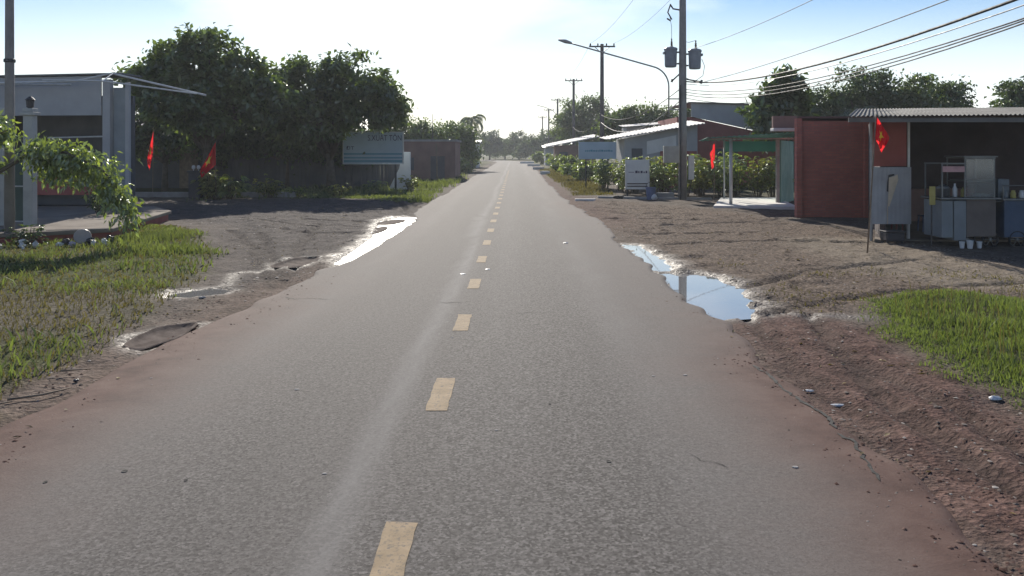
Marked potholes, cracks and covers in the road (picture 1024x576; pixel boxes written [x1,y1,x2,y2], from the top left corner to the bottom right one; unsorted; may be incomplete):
pothole [270,257,320,268]
pothole [123,322,198,351]
crack [753,365,880,480]
